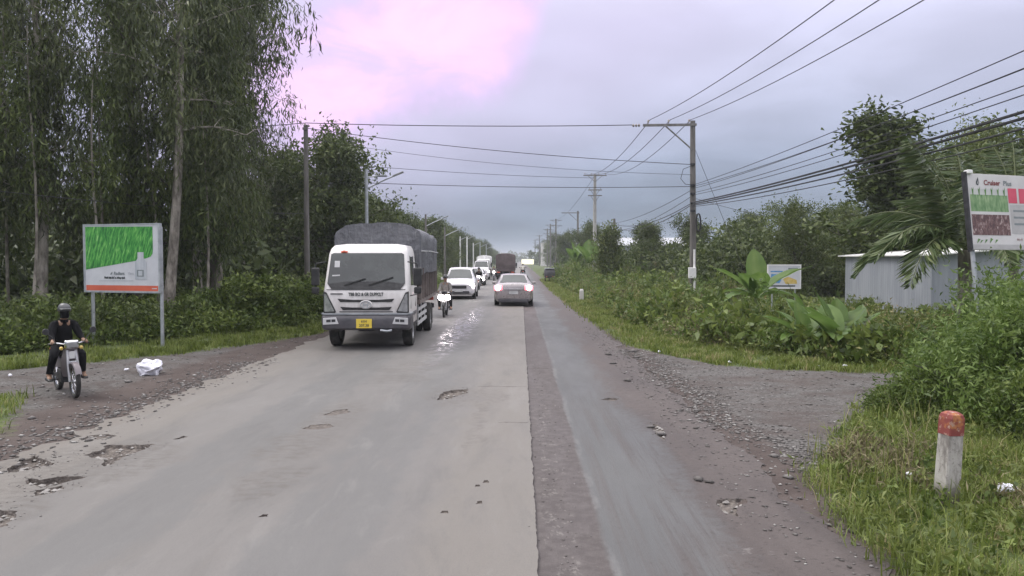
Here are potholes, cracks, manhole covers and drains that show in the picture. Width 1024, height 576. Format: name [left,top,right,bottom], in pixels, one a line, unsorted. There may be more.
pothole [437,389,468,400]
pothole [716,499,748,516]
pothole [86,444,155,466]
pothole [34,485,64,496]
pothole [25,476,85,487]
pothole [7,456,54,473]
pothole [0,510,17,527]
